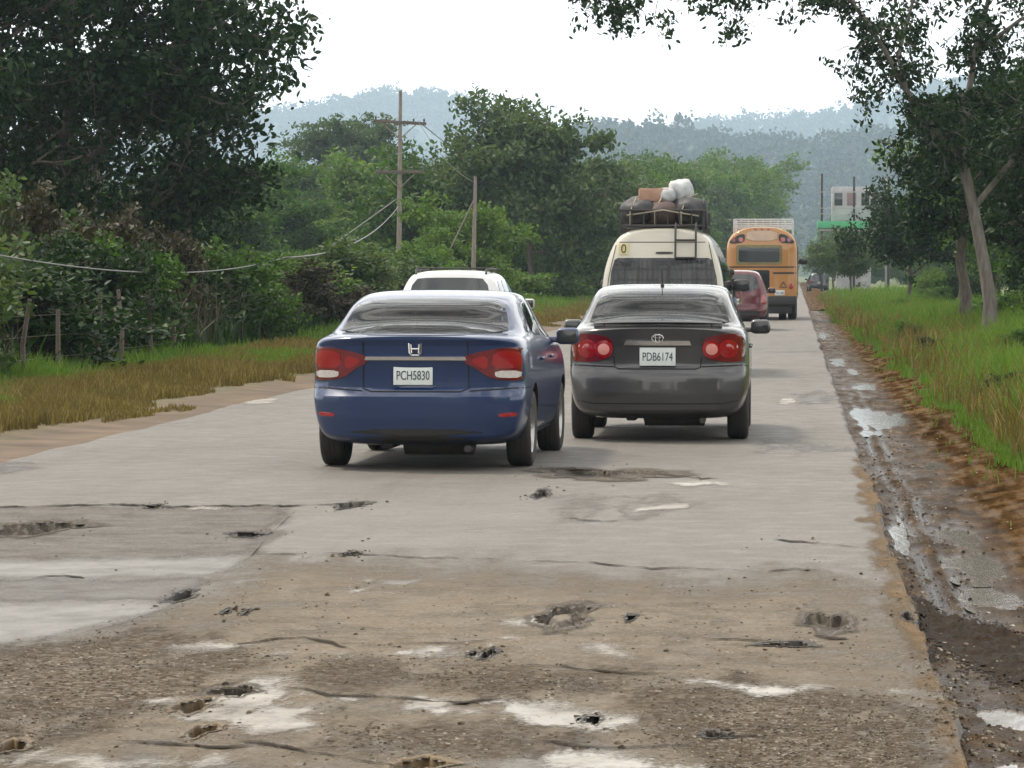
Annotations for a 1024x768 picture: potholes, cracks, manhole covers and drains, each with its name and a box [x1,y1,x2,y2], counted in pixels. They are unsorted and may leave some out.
pothole [747,639,822,648]
pothole [0,519,104,538]
pothole [333,500,377,510]
pothole [199,683,266,698]
pothole [476,647,500,660]
pothole [795,609,858,637]
crack [294,687,503,703]
pothole [580,712,605,726]
crack [238,636,346,647]
pothole [530,487,552,499]
pothole [524,600,600,634]
pothole [160,587,200,603]
